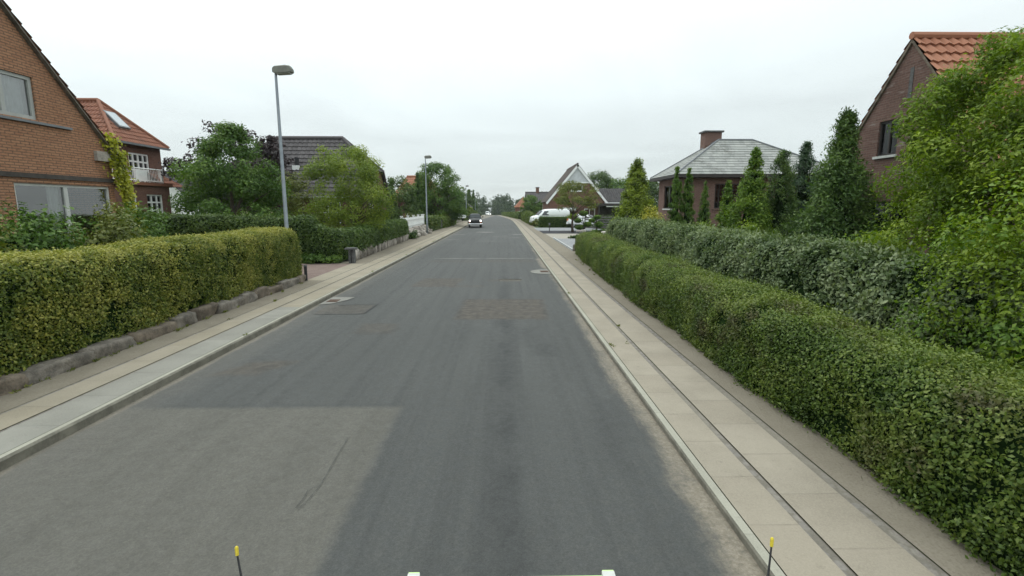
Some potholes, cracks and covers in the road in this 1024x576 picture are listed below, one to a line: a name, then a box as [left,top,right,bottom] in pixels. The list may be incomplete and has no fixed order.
crack [295,439,347,509]
